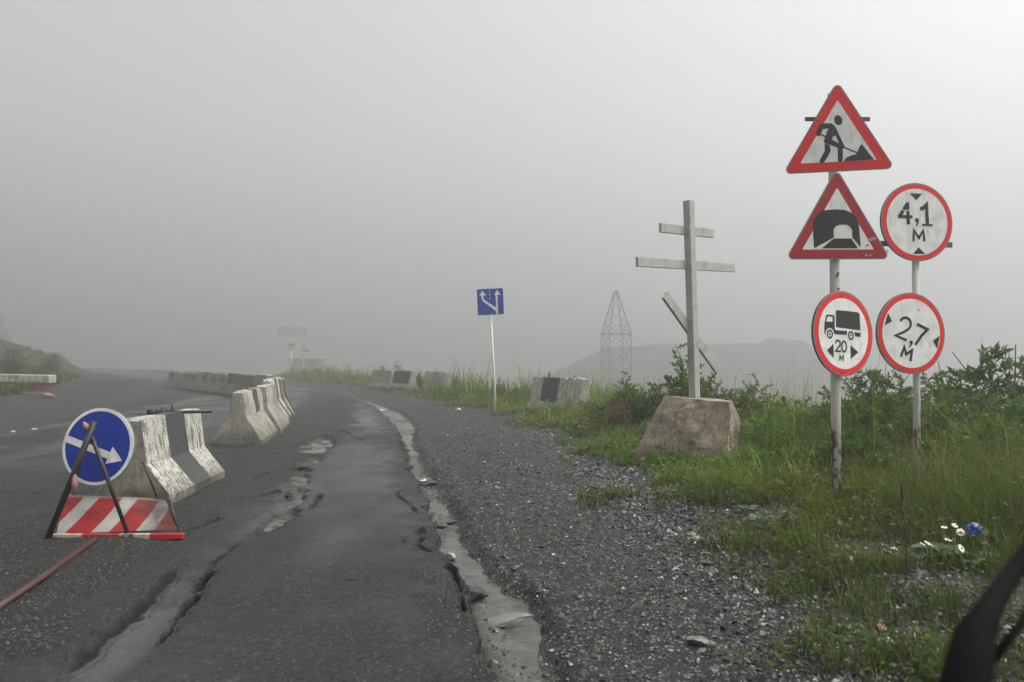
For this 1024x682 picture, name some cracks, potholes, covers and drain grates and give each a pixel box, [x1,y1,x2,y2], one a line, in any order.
pothole [255,506,306,536]
crack [393,486,470,612]
pothole [278,466,314,486]
pothole [294,454,328,468]
crack [247,472,325,513]
pothole [291,434,340,454]
crack [56,513,241,681]
pothole [277,486,311,509]
